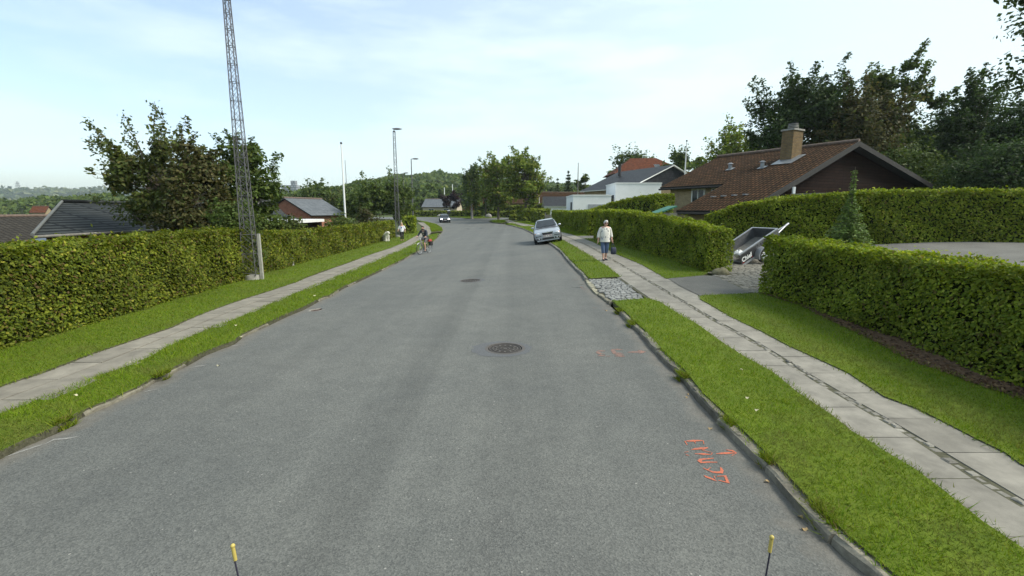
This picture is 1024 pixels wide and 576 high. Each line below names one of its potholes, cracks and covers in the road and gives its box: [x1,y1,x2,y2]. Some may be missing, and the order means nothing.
manhole cover [471,341,533,357]
